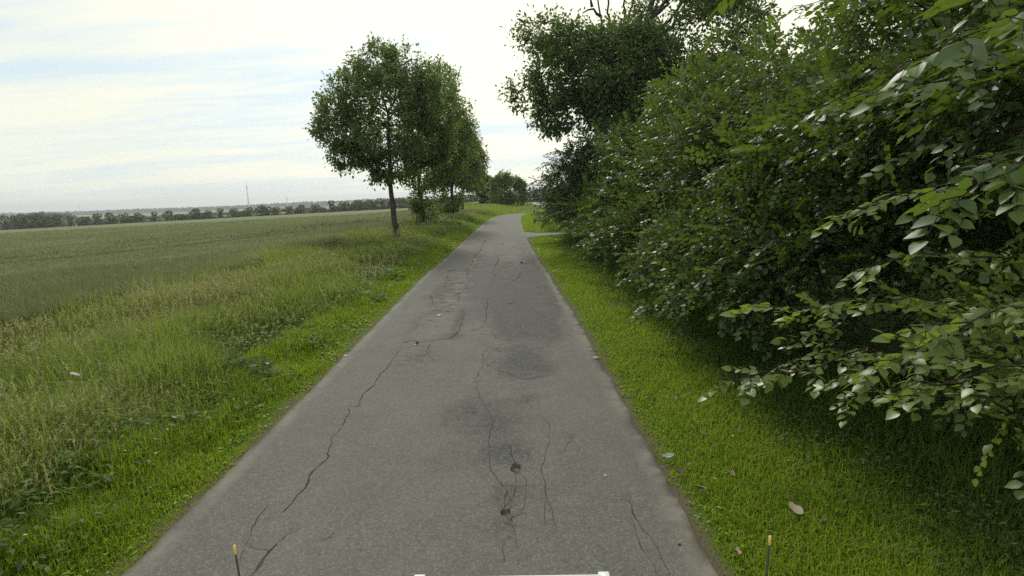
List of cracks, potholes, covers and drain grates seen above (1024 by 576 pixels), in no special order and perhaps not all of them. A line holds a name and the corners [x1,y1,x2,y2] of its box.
crack [240,240,570,576]
crack [630,502,671,576]
